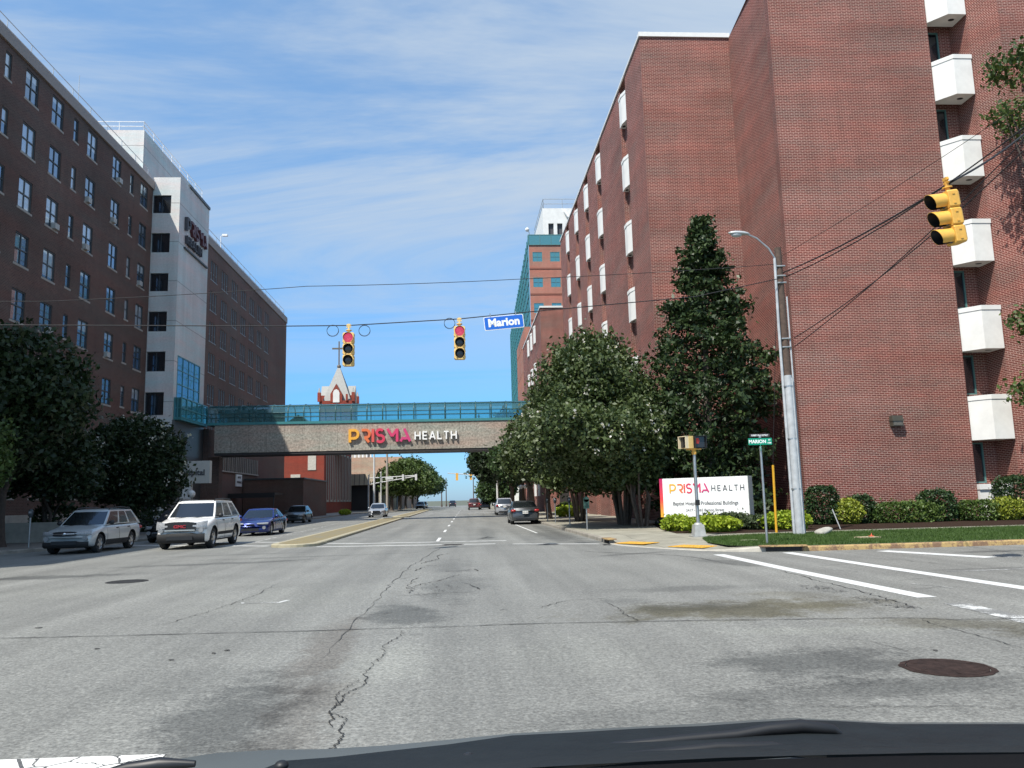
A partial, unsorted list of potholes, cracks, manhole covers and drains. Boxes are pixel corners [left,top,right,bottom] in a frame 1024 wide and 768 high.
crack [328,553,480,748]
crack [779,558,939,608]
manhole cover [898,658,999,677]
